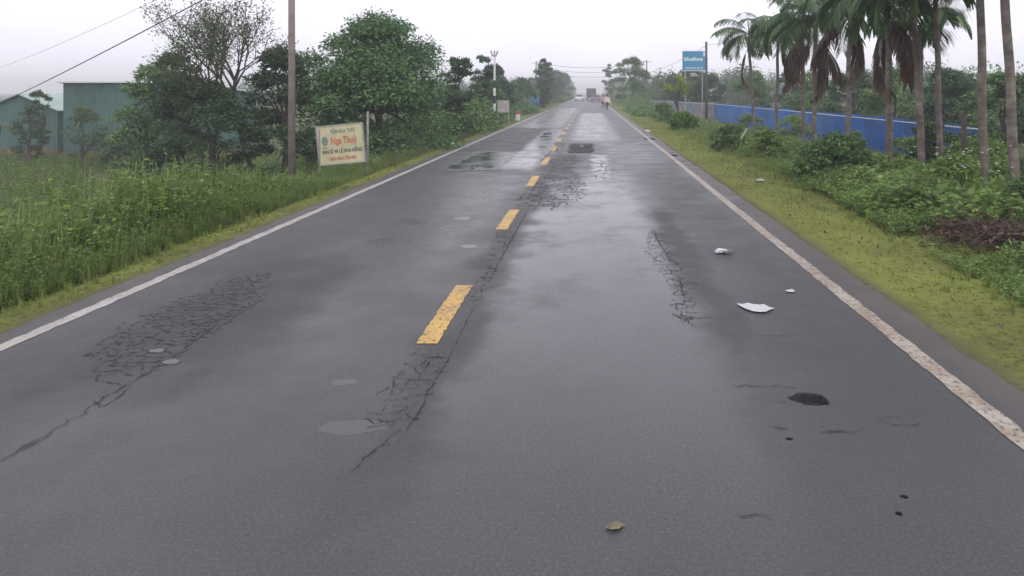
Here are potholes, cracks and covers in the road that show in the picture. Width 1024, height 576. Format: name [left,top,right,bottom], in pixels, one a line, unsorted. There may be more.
crack [0,274,272,461]
crack [646,229,708,326]
pothole [787,393,830,406]
crack [352,142,611,471]
pothole [566,143,596,154]
